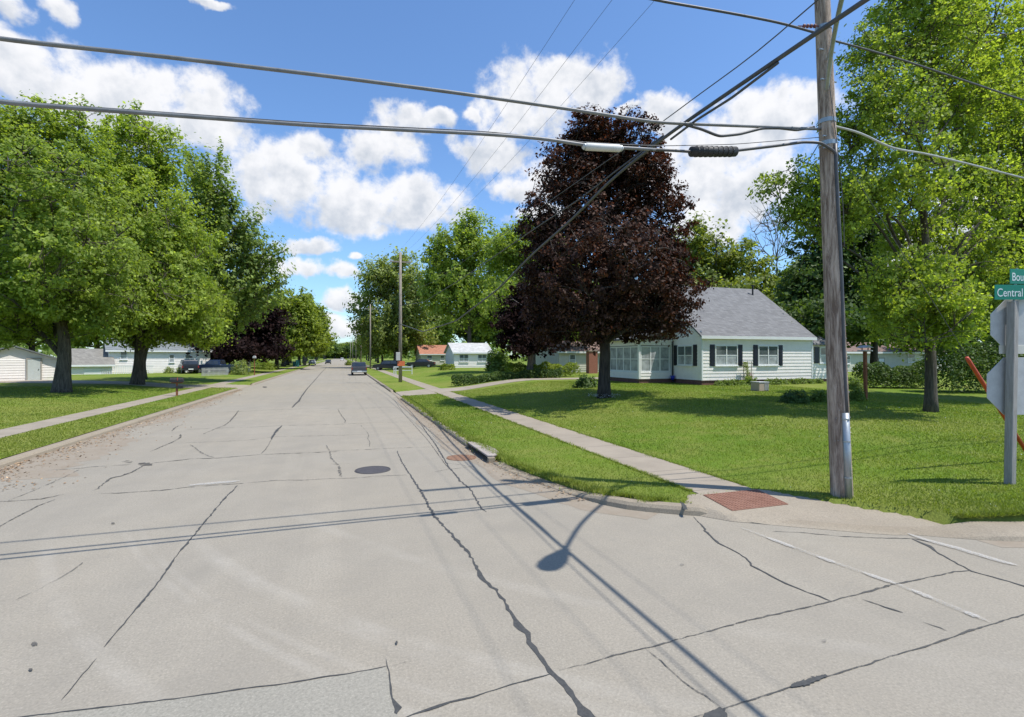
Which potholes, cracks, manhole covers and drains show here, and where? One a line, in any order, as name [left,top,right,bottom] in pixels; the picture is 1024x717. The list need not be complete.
pothole [791,674,828,687]
crack [92,413,237,491]
crack [780,531,1024,586]
crack [62,485,238,699]
crack [386,660,402,714]
manhole cover [355,466,391,474]
